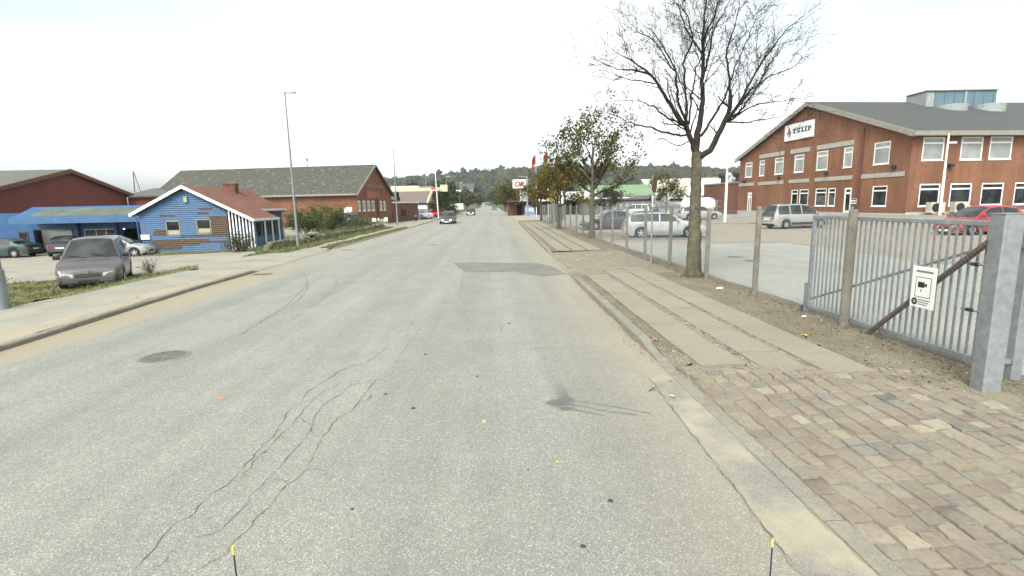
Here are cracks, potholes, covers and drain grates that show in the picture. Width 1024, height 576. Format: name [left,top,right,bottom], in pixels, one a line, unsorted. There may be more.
crack [138,325,419,568]
manhole cover [136,350,191,364]
crack [240,271,337,335]
